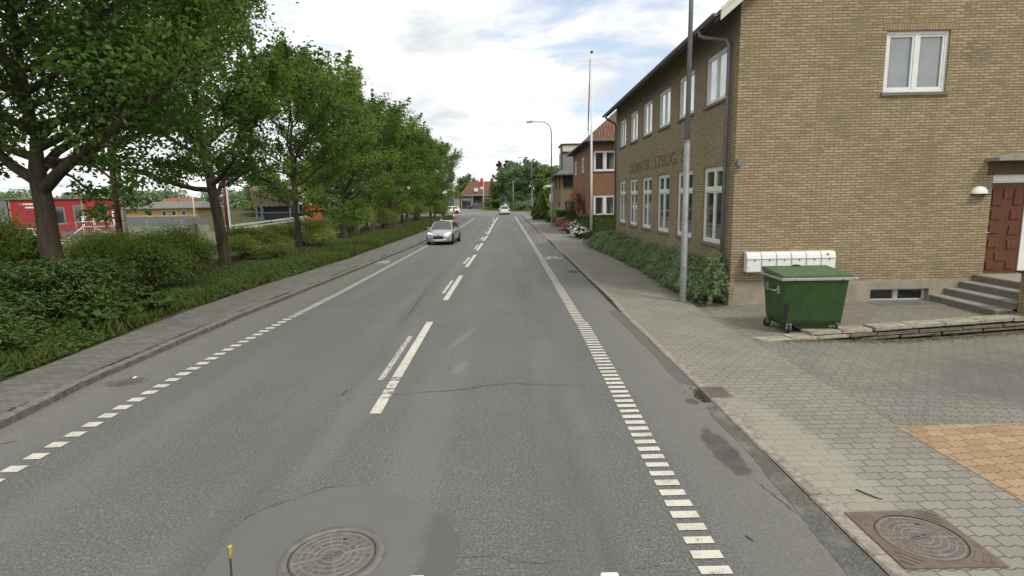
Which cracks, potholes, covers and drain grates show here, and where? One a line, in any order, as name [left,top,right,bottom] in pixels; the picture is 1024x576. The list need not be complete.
manhole cover [844,510,1009,570]
manhole cover [277,526,386,576]
